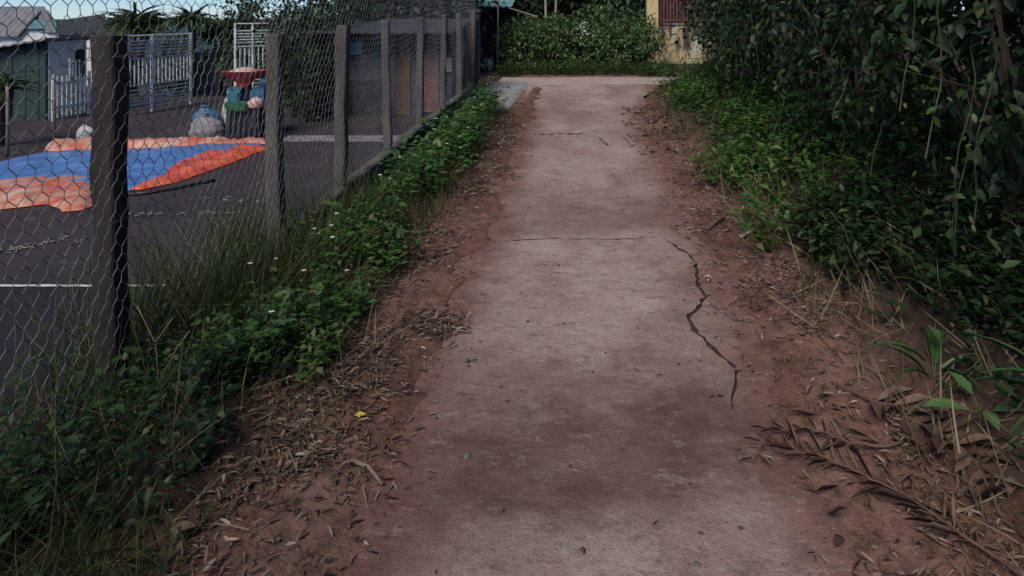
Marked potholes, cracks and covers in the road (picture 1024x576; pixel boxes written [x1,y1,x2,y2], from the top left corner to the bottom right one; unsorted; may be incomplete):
crack [531,132,609,146]
crack [513,237,752,409]
